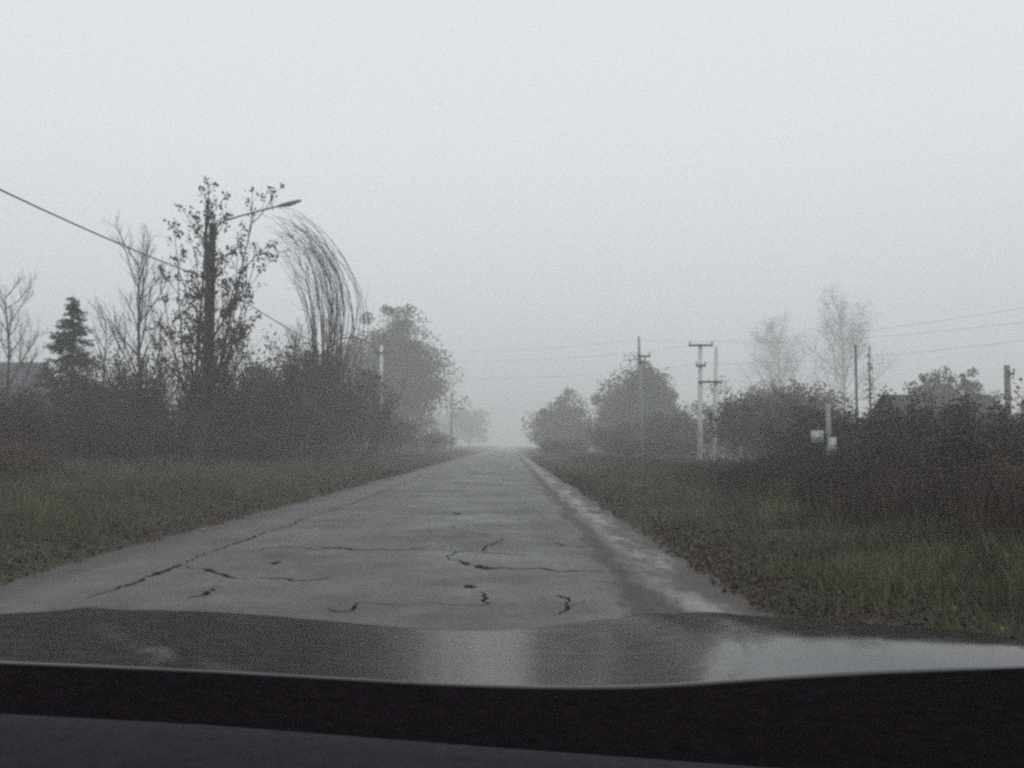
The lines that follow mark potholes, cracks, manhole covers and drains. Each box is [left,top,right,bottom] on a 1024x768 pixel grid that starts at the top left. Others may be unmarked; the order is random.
crack [328,591,492,612]
crack [554,594,585,615]
crack [84,477,639,599]
